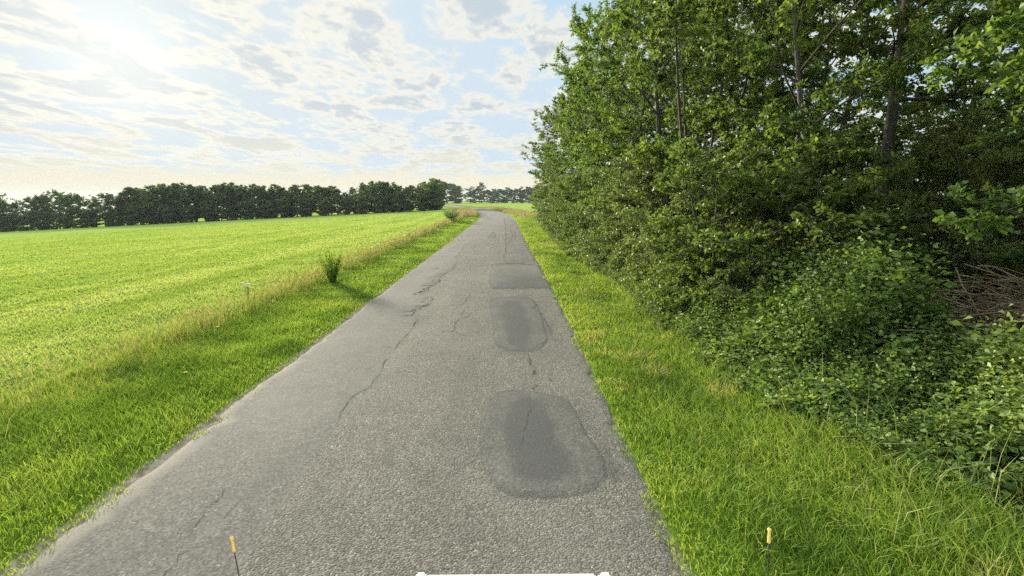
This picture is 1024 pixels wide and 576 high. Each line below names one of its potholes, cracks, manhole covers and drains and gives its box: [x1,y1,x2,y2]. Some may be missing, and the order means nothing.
crack [315,265,455,458]
